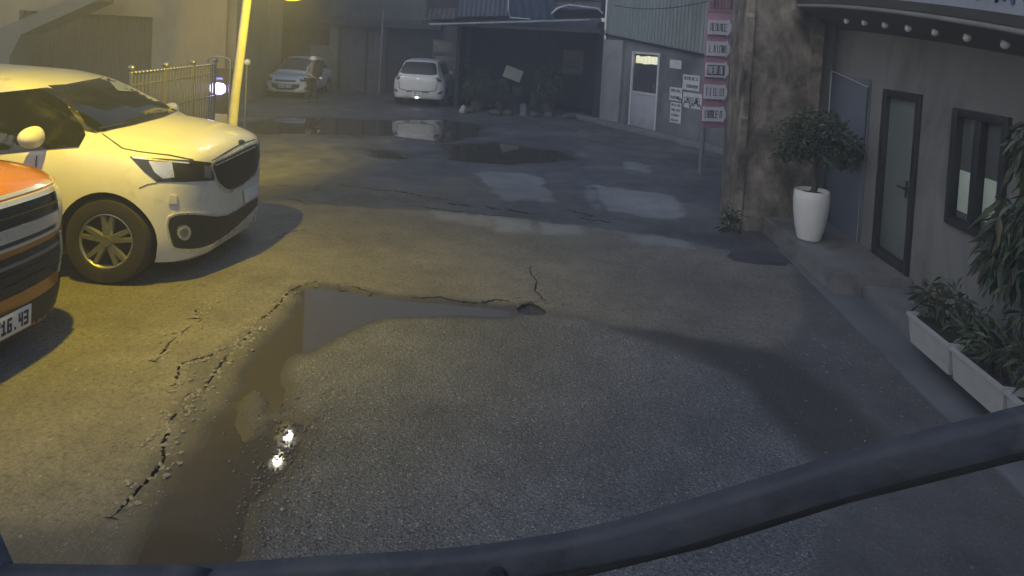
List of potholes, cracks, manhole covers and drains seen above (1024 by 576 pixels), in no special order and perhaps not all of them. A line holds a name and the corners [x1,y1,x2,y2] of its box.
crack [101,280,375,520]
pothole [505,298,554,321]
crack [271,182,537,220]
crack [406,263,554,309]
crack [565,209,613,225]
